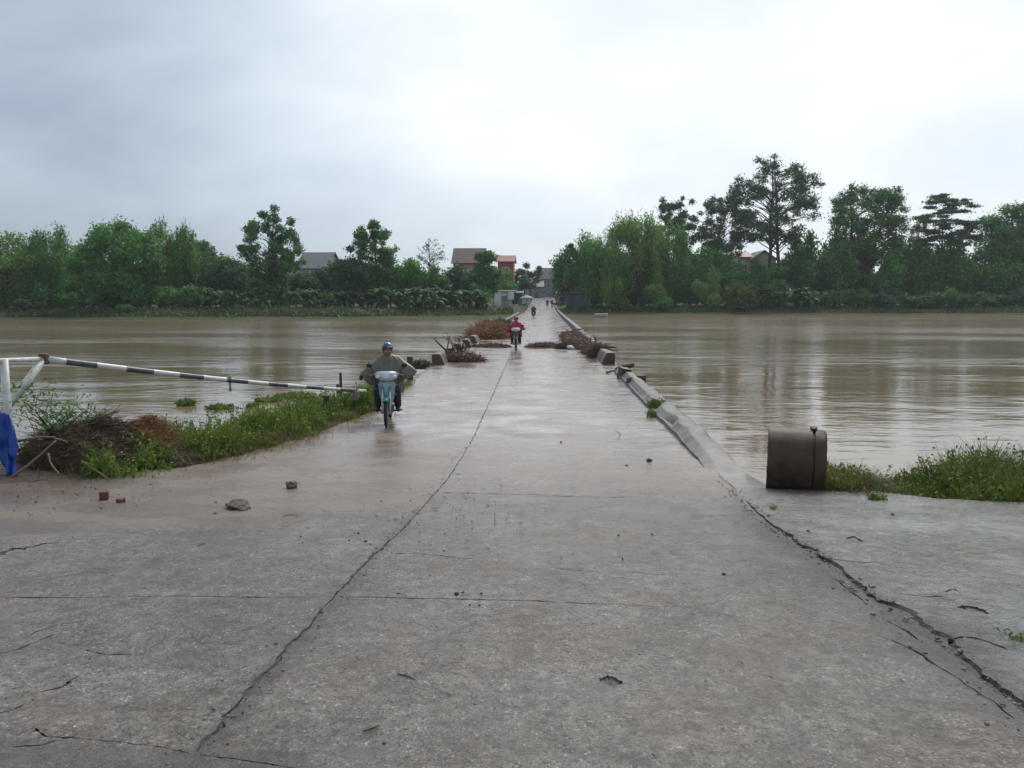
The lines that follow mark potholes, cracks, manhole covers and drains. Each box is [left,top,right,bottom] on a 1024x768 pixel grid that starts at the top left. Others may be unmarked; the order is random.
crack [0,543,51,555]
crack [748,502,1024,718]
crack [18,360,509,768]
